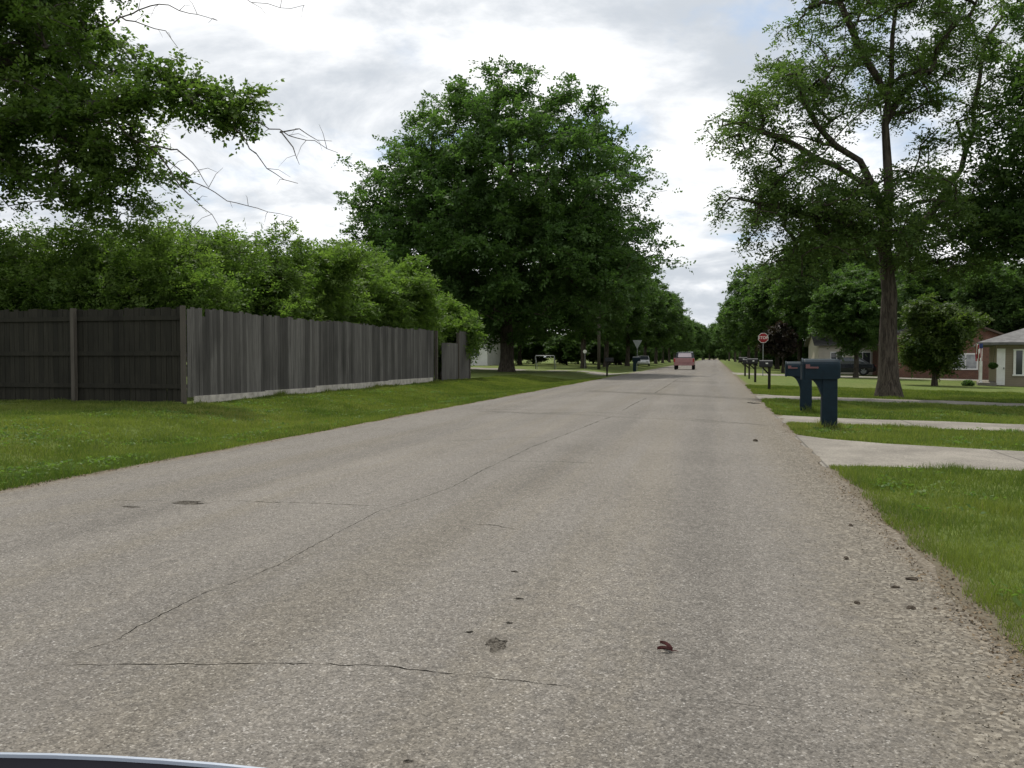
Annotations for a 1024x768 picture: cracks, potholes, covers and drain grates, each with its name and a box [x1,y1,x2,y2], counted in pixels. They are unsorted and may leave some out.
pothole [485,637,508,653]
crack [61,663,570,687]
